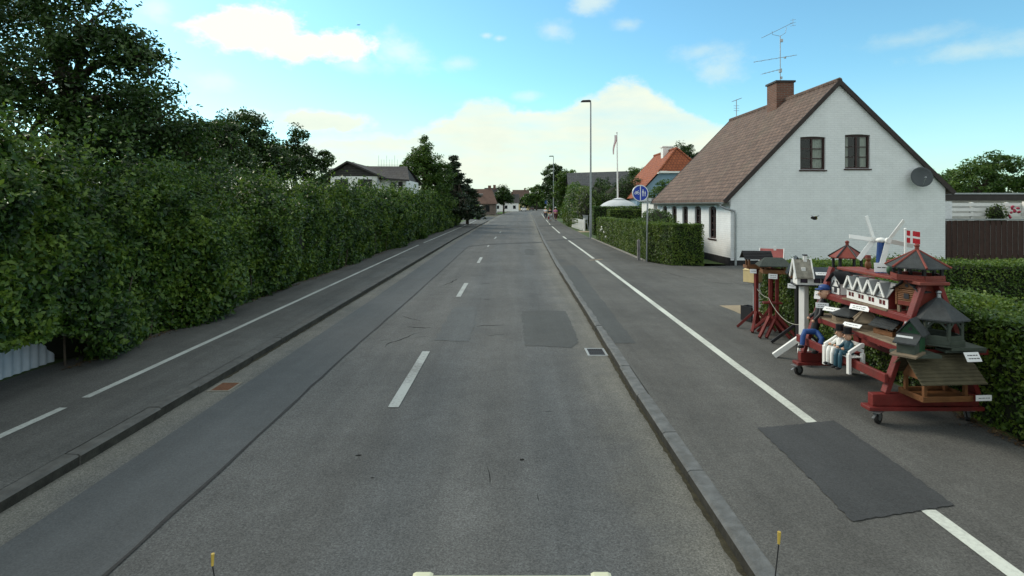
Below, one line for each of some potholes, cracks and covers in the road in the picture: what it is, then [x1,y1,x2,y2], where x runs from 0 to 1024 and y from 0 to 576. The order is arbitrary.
drain grate [584,348,608,356]
drain grate [207,382,243,392]
